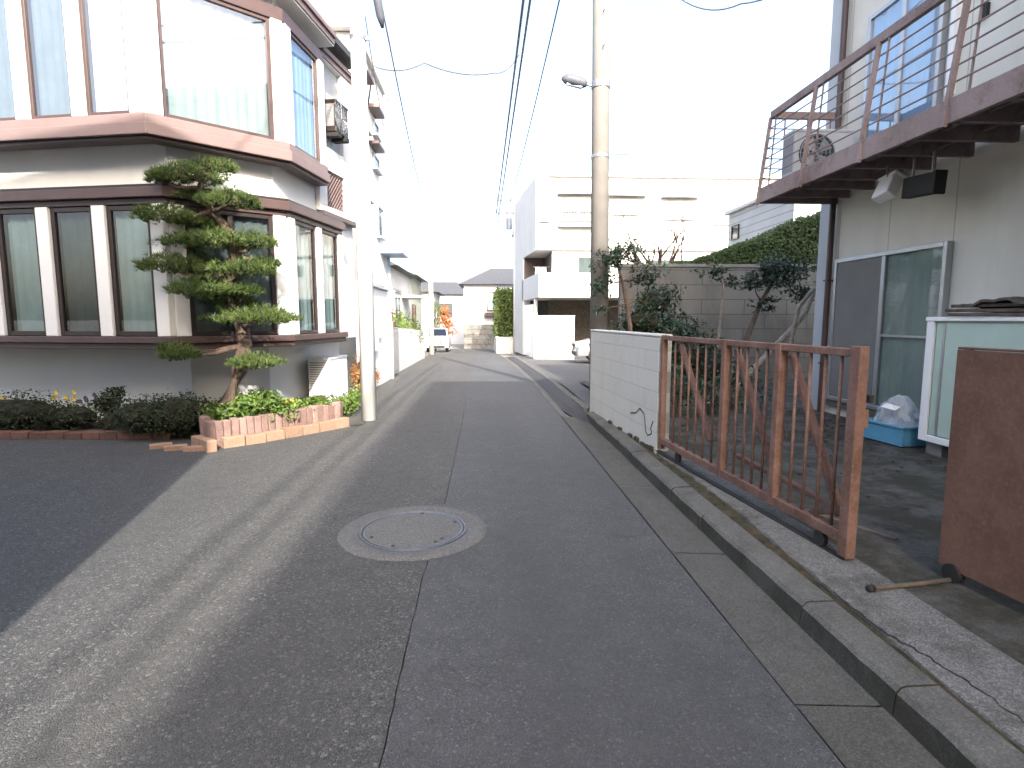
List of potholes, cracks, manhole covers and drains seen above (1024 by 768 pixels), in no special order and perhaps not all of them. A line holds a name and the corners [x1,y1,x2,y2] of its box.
crack [816,579,1024,723]
manhole cover [337,505,487,561]
